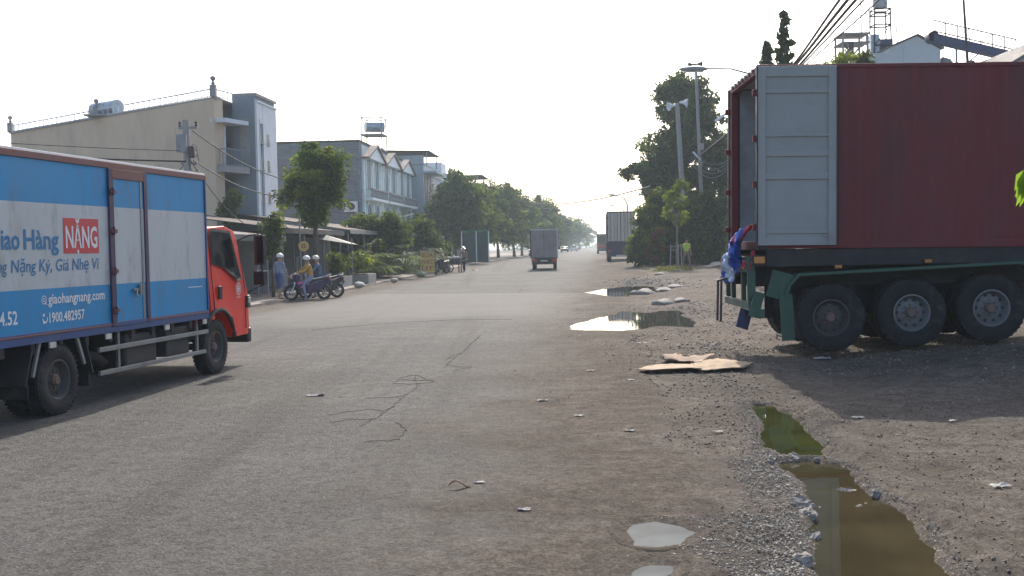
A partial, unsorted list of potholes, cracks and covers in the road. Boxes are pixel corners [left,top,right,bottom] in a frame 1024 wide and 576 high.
pothole [609,556,690,576]
crack [328,337,479,442]
pothole [747,401,835,458]
pothole [606,516,714,552]
pothole [559,309,705,331]
pothole [580,285,661,297]
pothole [777,457,971,576]
